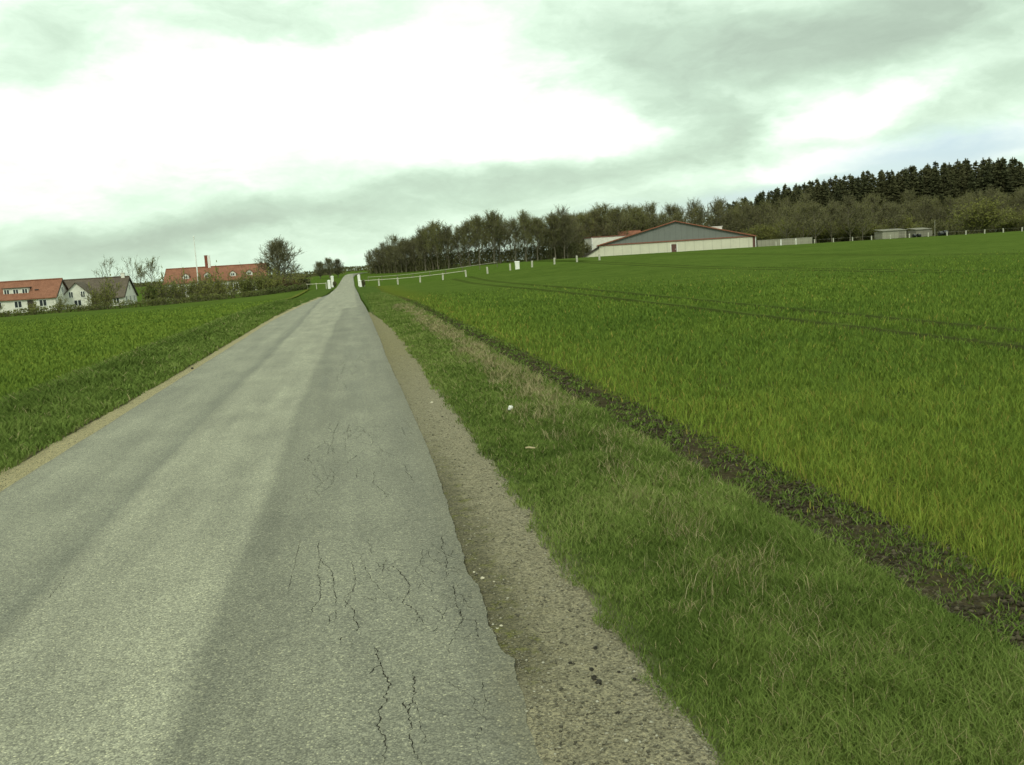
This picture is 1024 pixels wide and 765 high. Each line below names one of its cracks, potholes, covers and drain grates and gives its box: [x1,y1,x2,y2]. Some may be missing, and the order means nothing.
crack [308,532,490,764]
crack [305,420,411,497]
